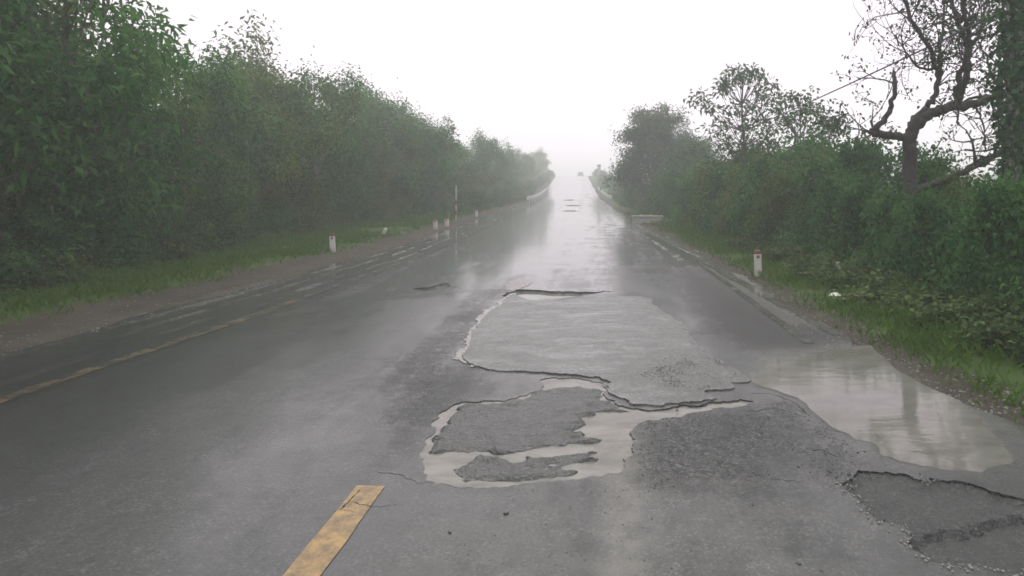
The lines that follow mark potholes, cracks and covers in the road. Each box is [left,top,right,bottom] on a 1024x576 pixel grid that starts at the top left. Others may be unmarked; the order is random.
pothole [830,470,1024,576]
pothole [418,377,753,489]
